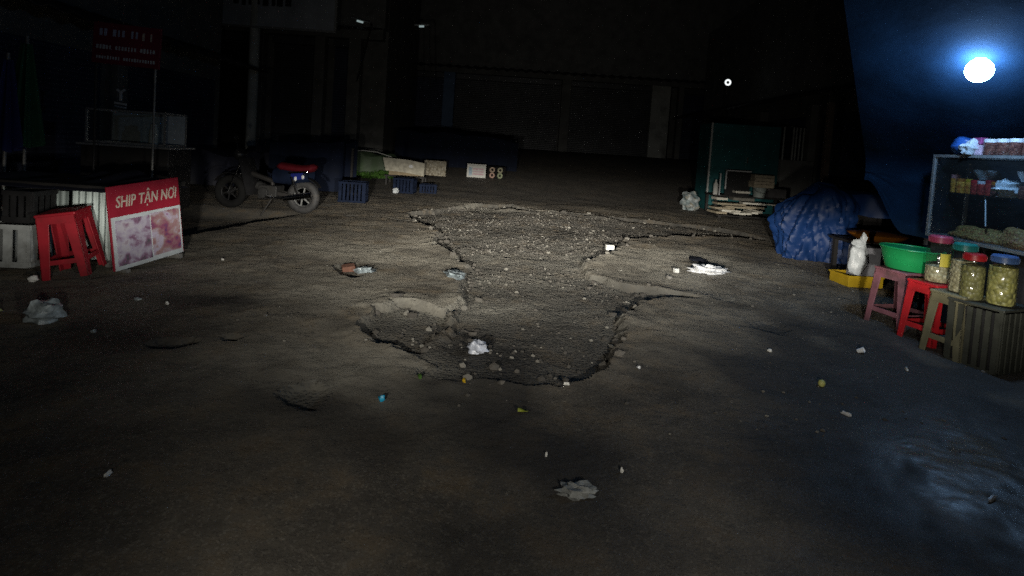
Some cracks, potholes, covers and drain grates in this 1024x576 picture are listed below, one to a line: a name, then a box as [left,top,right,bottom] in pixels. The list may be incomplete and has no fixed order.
pothole [142,336,203,349]
pothole [355,297,456,362]
pothole [271,379,335,413]
pothole [217,332,248,342]
pothole [407,203,771,387]
